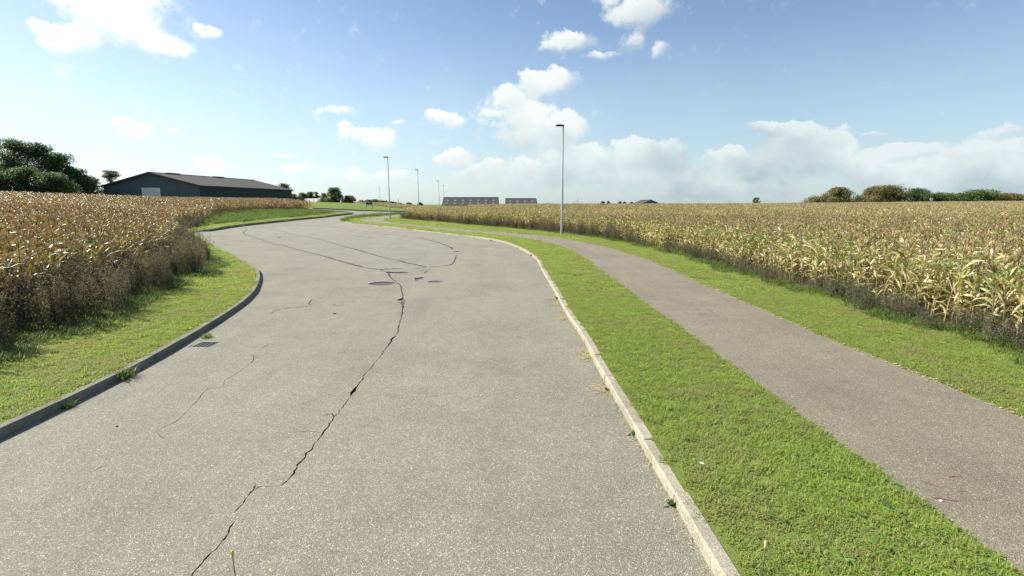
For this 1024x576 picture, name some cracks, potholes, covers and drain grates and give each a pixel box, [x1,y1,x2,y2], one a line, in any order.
crack [156,344,269,439]
crack [191,227,457,576]
